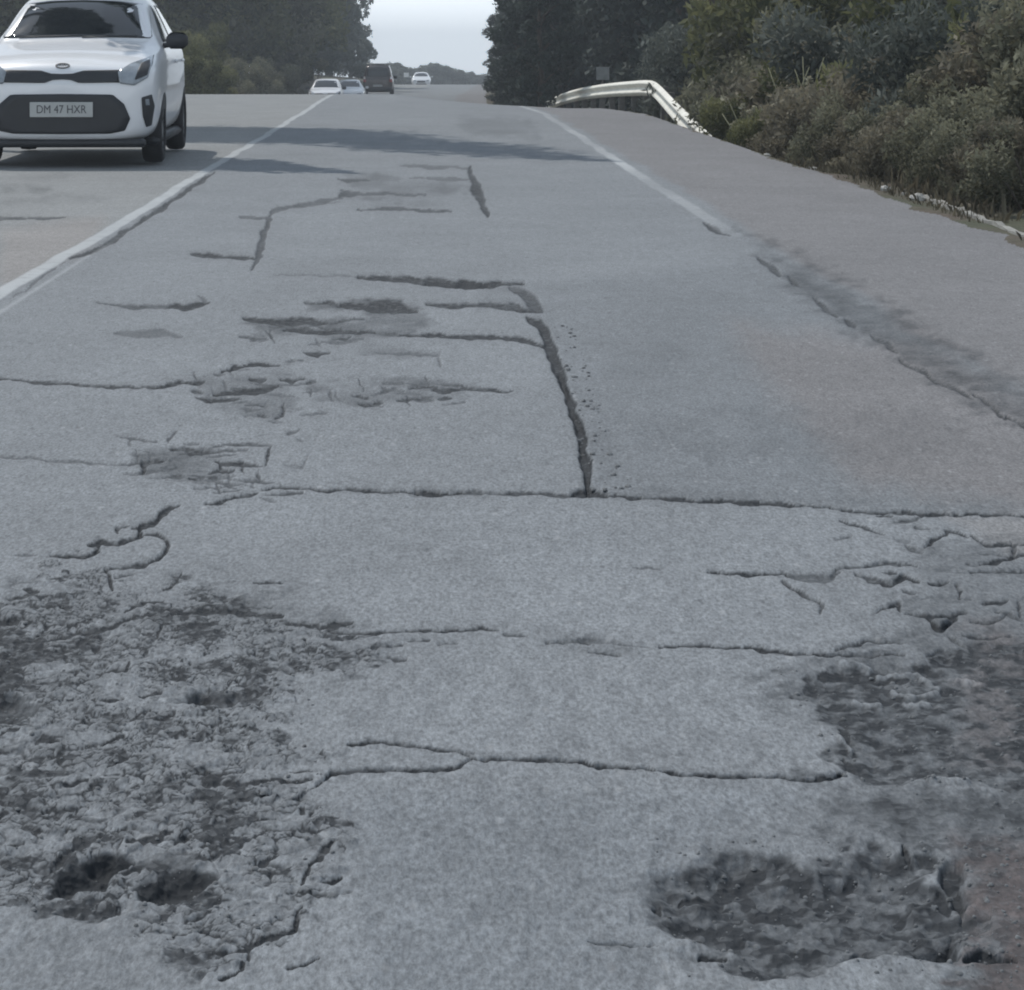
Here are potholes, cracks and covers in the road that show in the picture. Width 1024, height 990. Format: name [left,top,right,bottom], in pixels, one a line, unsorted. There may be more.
crack [97,295,211,338]
crack [298,177,453,213]
crack [15,504,181,591]
crack [426,300,544,314]
pothole [631,834,992,983]
crack [399,163,490,218]
crack [0,547,398,982]
pothole [904,934,1018,964]
crack [703,221,1024,429]
crack [205,484,1024,518]
crack [835,514,1024,657]
crack [400,332,547,350]
